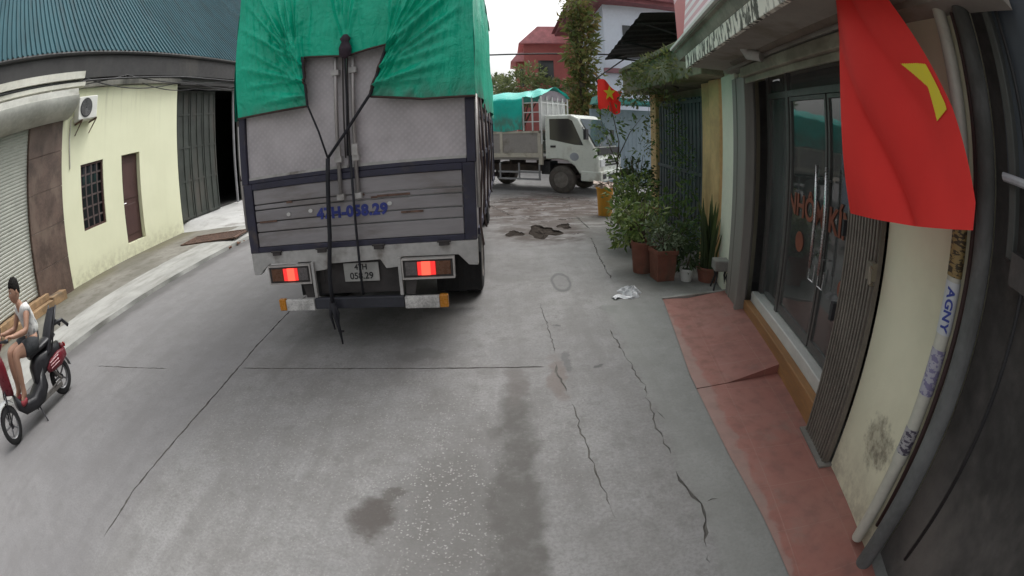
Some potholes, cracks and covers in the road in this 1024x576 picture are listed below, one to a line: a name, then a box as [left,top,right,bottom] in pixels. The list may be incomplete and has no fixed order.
crack [676,472,716,559]
pothole [529,225,563,240]
crack [541,308,616,519]
crack [610,330,671,453]
crack [576,217,611,278]
